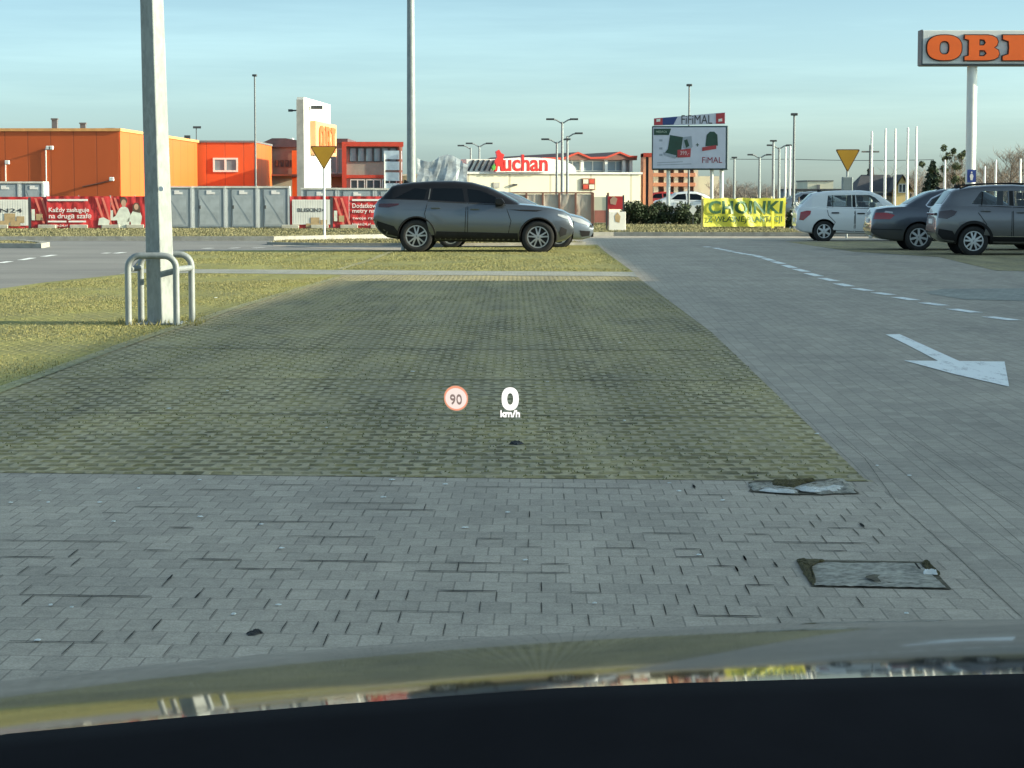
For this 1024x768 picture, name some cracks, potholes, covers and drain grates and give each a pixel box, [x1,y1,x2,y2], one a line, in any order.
pothole [748,477,859,495]
manhole cover [797,558,951,589]
